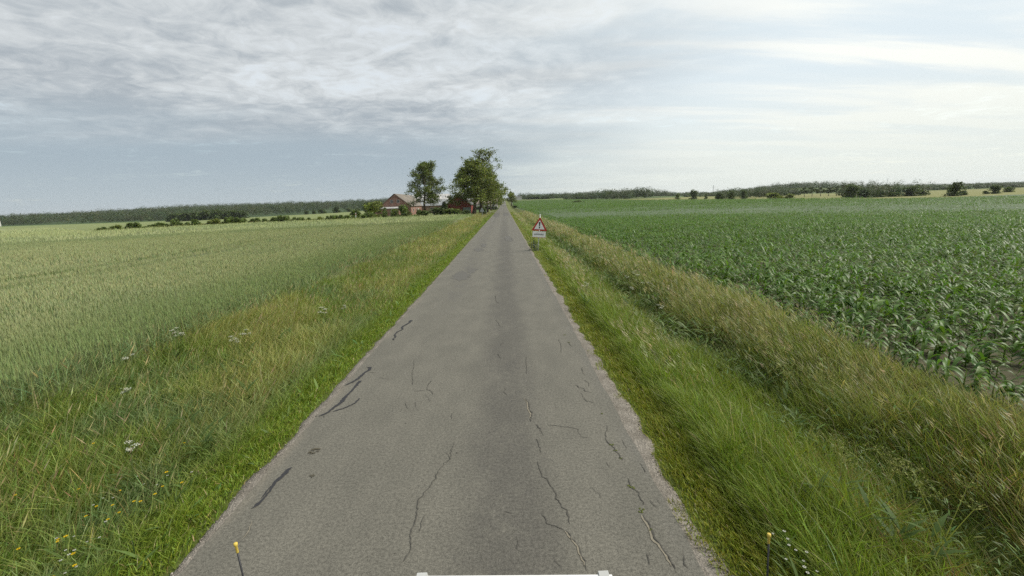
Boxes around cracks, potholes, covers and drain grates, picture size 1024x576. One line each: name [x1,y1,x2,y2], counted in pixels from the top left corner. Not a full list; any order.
crack [401,444,454,563]
crack [526,400,587,570]
crack [605,429,686,569]
